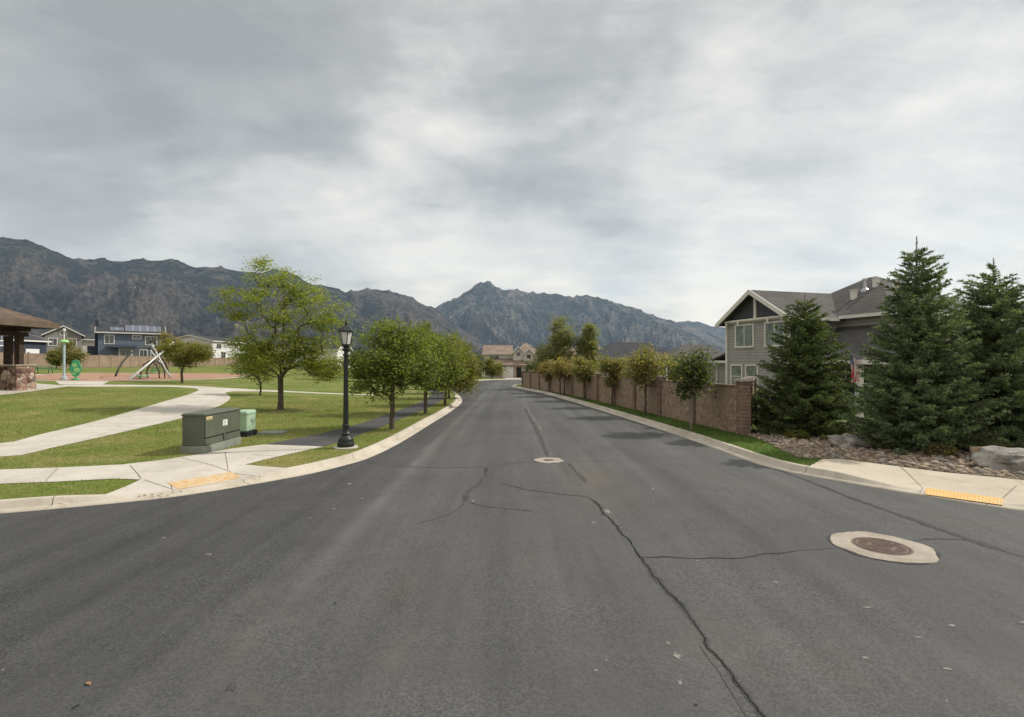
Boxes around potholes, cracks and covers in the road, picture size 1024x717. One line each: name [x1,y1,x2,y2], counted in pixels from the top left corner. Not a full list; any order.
crack [505,484,839,717]
manhole cover [827,531,941,565]
crack [369,461,531,523]
